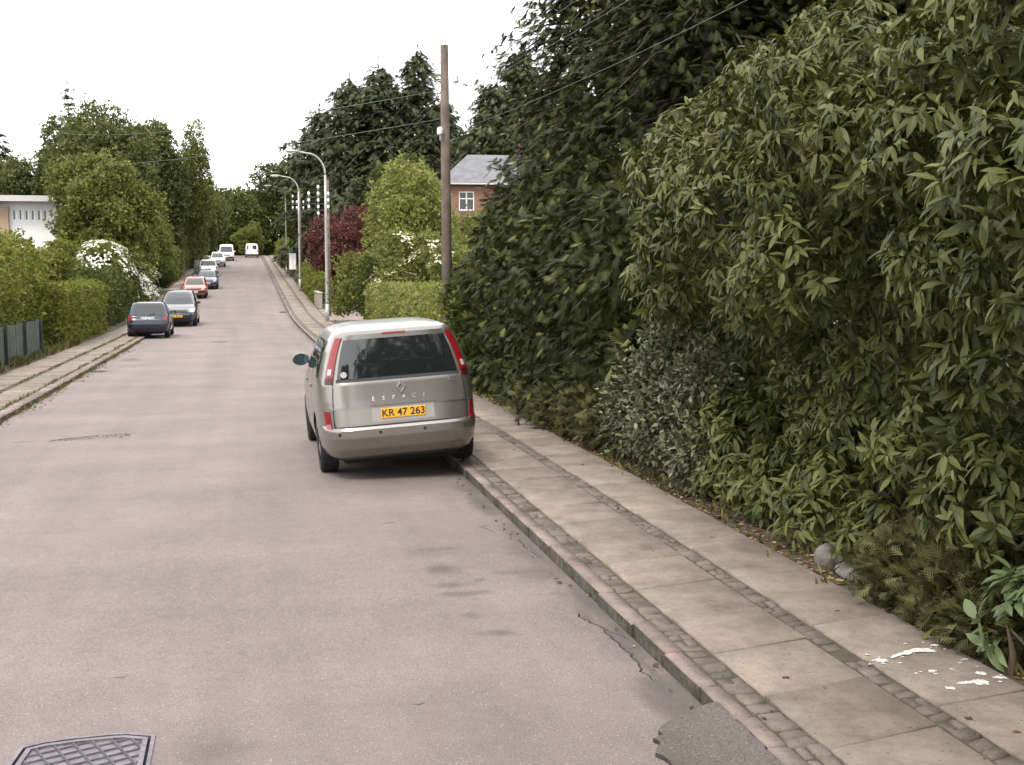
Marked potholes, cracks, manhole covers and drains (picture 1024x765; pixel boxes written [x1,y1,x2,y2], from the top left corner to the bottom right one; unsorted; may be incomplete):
crack [578,613,654,681]
manhole cover [7,732,156,765]
